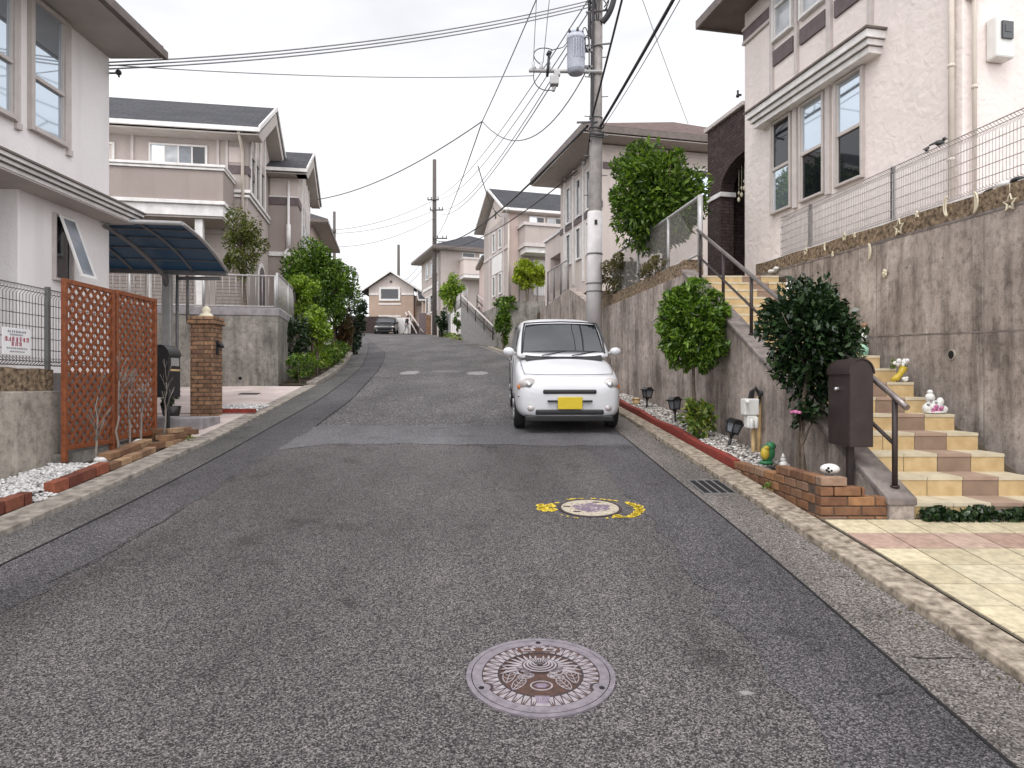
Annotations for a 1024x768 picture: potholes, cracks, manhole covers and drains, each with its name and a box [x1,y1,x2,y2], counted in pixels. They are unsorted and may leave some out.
manhole cover [466,638,616,719]
drain grate [687,479,739,494]
manhole cover [558,499,622,518]
